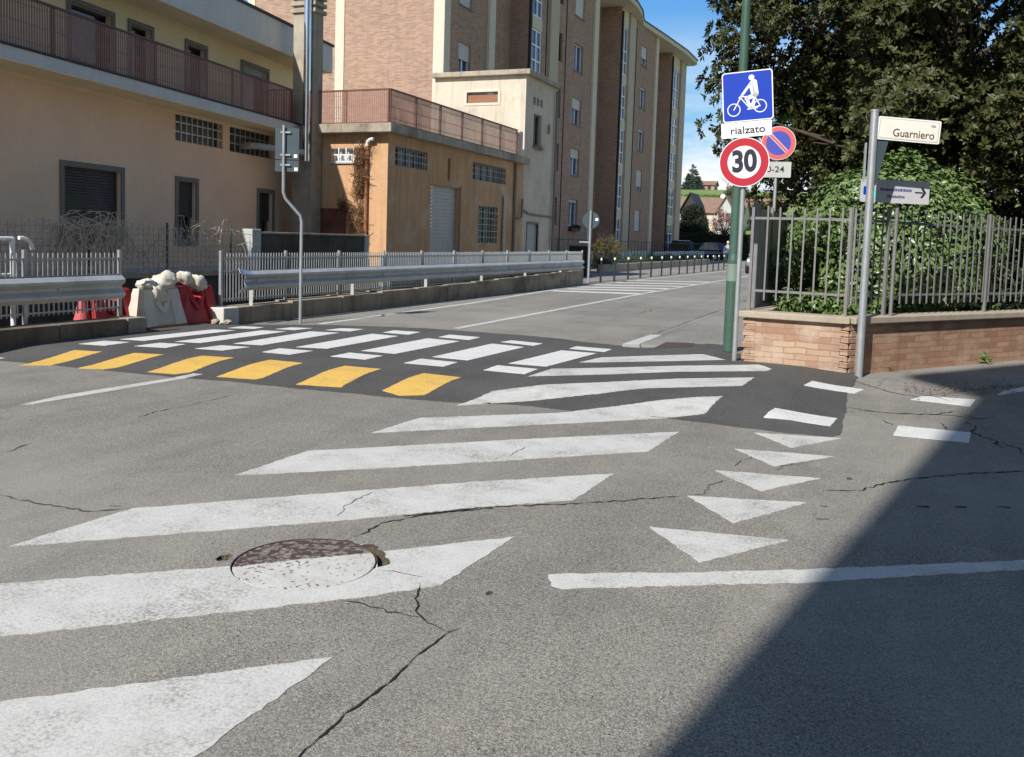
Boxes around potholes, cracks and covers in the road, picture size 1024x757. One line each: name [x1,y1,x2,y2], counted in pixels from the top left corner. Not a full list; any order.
manhole cover [230,538,378,590]
crack [847,395,1022,453]
crack [347,476,743,539]
crack [298,570,458,757]
crack [4,495,131,511]
crack [816,471,1010,519]
